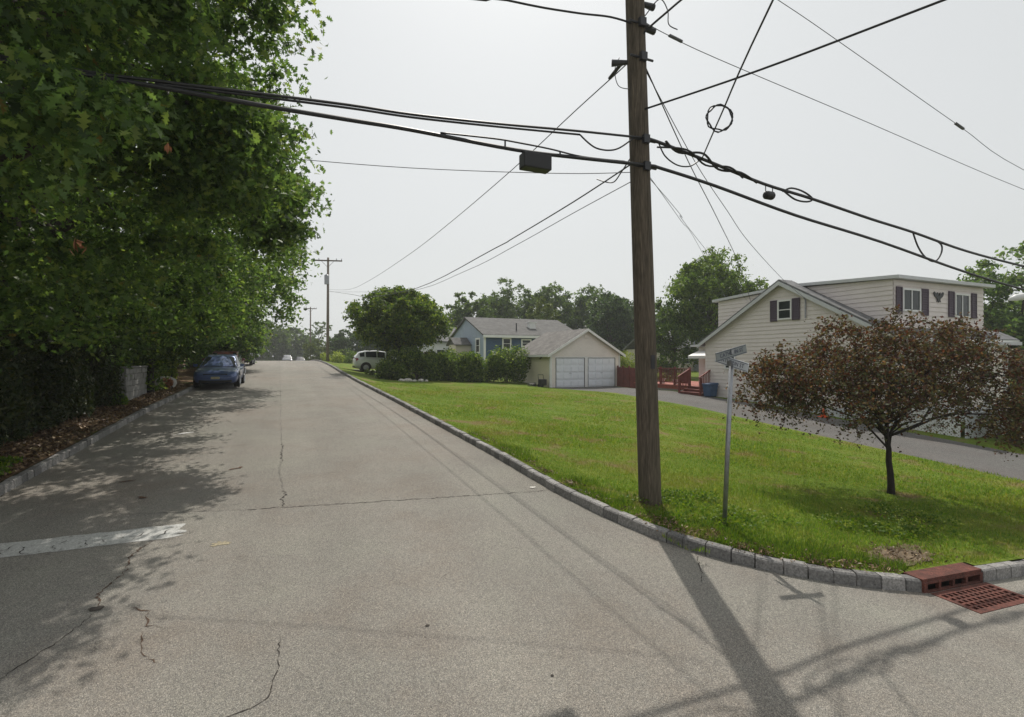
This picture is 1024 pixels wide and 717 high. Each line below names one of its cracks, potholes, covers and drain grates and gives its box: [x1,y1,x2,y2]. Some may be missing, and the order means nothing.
crack [1,510,228,678]
crack [226,637,281,717]
drain grate [903,562,1024,614]
